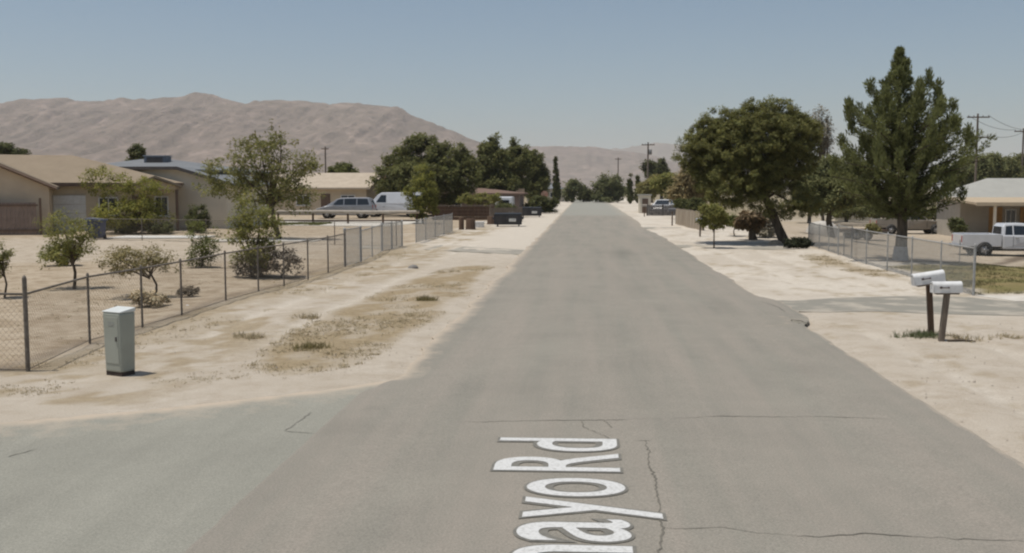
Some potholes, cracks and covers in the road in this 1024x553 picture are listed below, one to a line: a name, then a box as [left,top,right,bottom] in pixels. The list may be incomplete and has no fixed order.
crack [634,440,1020,553]
crack [457,416,861,439]
